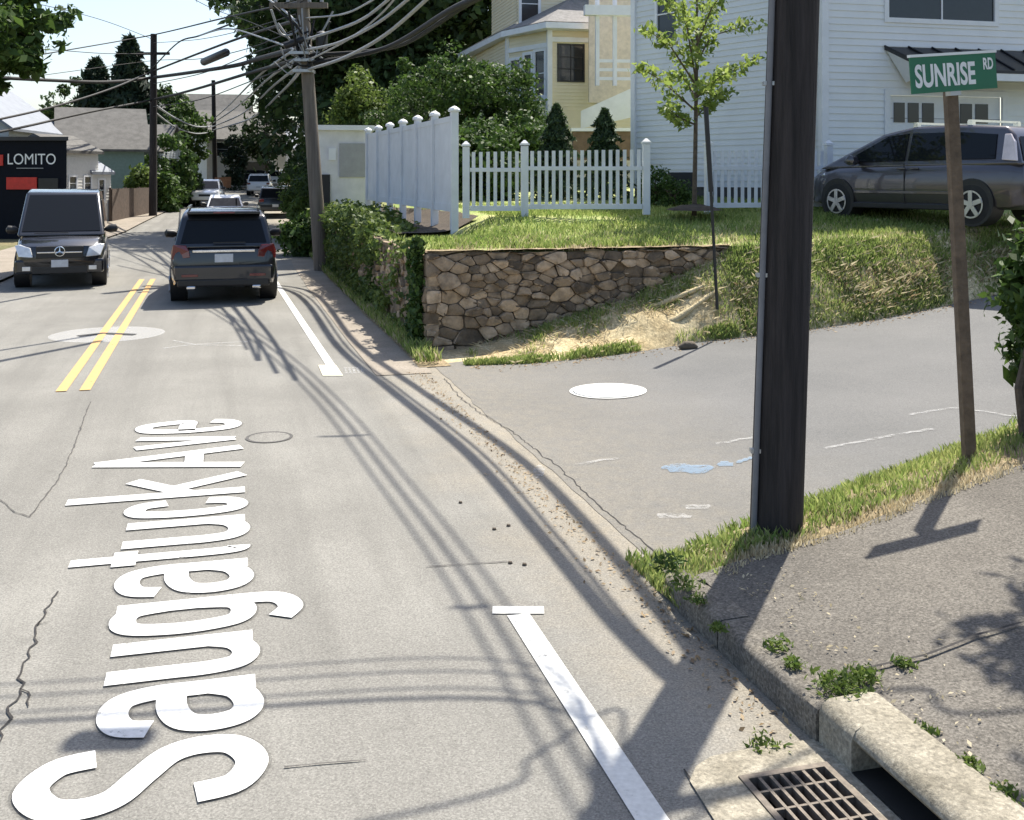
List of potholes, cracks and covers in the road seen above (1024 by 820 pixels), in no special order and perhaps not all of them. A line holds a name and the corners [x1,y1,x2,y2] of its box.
drain grate [690,692,1024,820]
manhole cover [570,383,647,398]
crack [0,401,91,517]
crack [0,591,59,742]
manhole cover [245,431,293,443]
